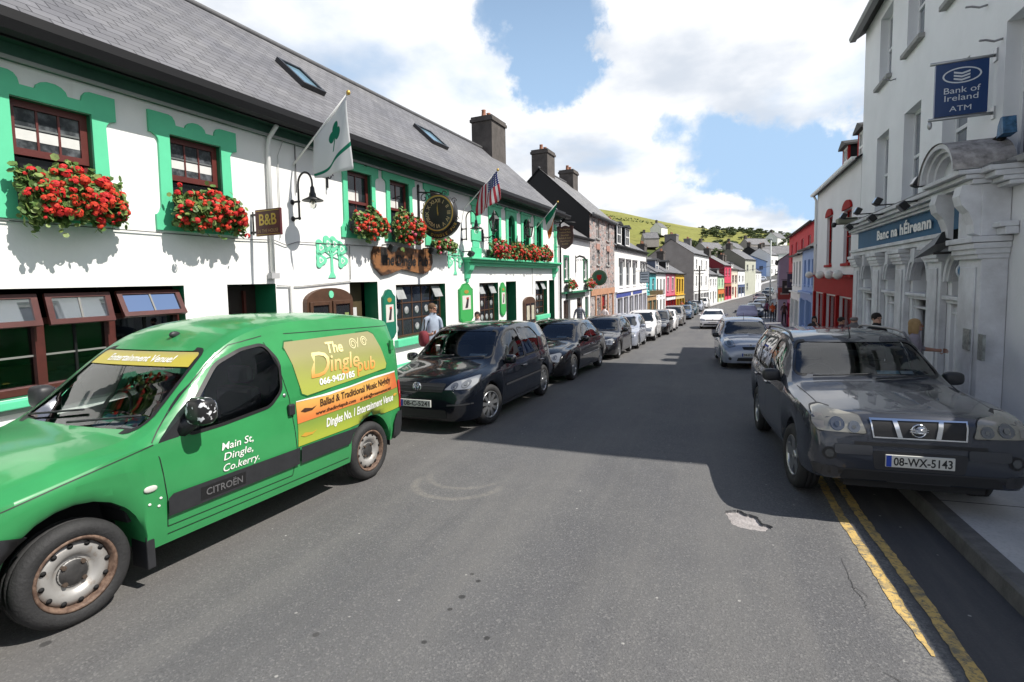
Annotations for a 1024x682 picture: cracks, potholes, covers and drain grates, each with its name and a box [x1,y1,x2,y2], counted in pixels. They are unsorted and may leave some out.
pothole [725,510,773,531]
